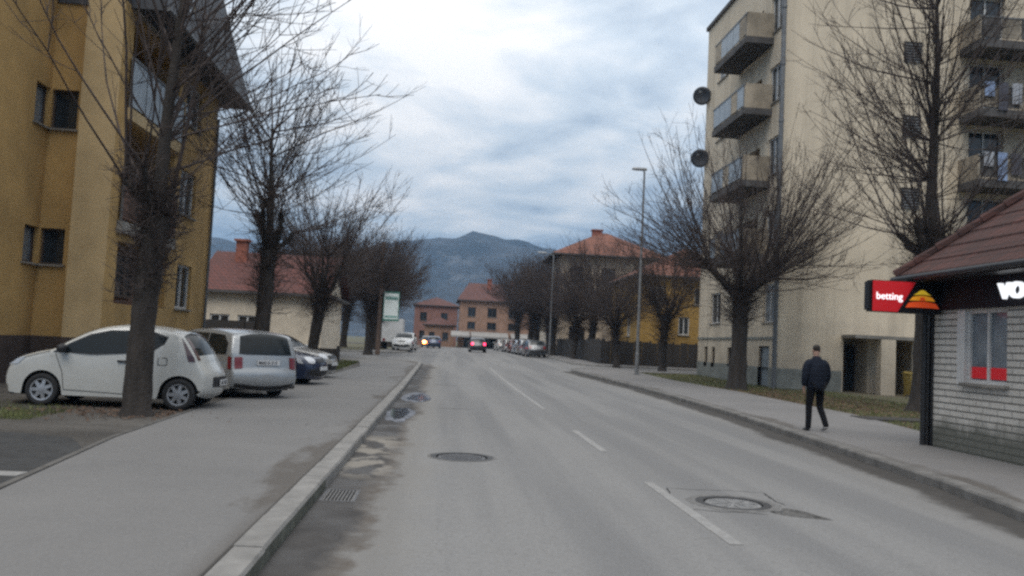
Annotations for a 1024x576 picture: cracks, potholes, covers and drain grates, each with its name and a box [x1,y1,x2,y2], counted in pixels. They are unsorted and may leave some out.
drain grate [318,489,361,502]
manhole cover [686,494,781,513]
manhole cover [427,452,497,462]
